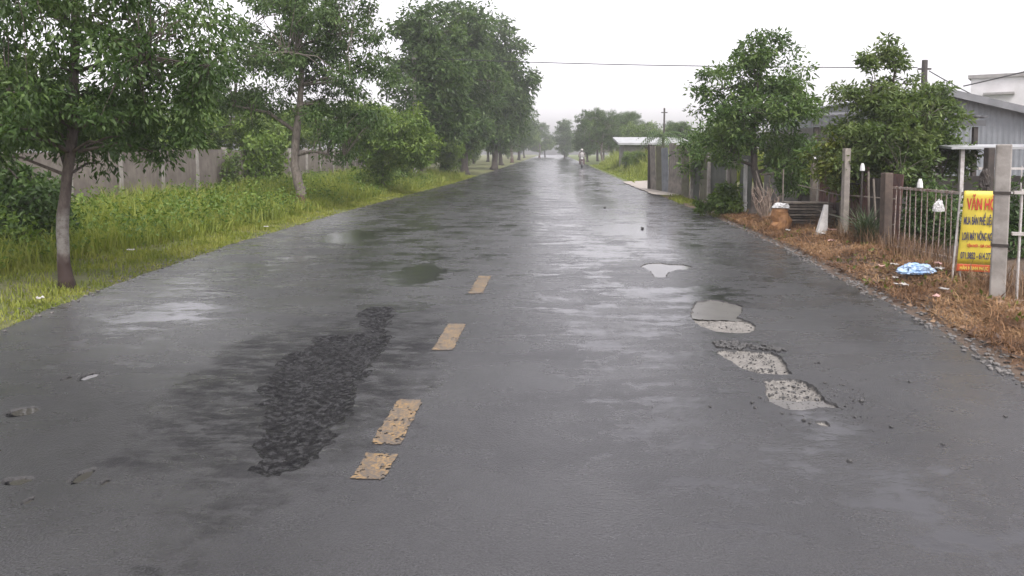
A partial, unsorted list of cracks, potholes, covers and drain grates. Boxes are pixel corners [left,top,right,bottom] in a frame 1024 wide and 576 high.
pothole [762,378,840,410]
pothole [690,300,756,333]
pothole [716,349,792,375]
pothole [640,263,692,277]
